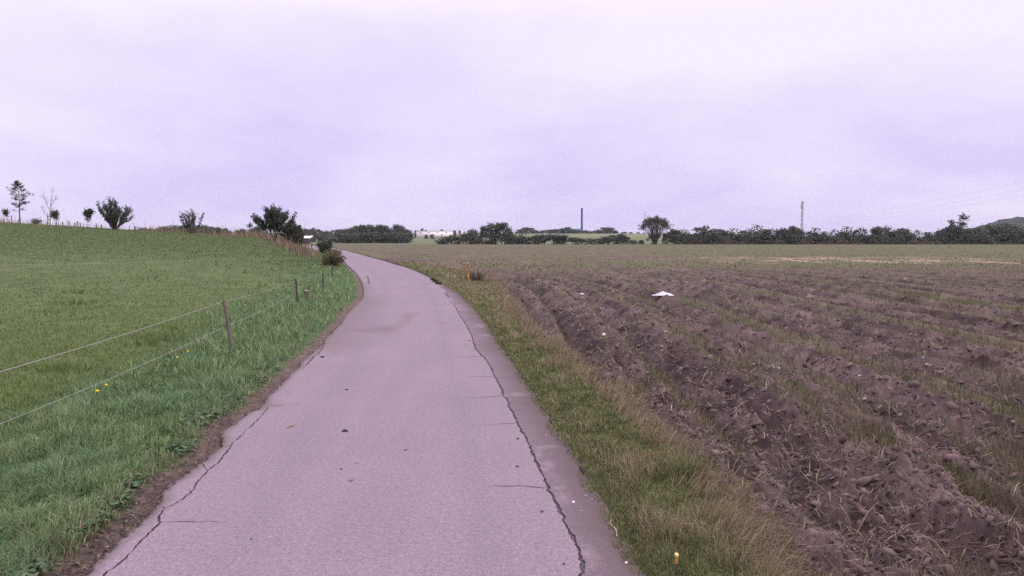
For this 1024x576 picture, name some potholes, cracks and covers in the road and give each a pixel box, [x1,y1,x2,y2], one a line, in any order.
crack [433,282,586,576]
crack [102,403,295,576]
